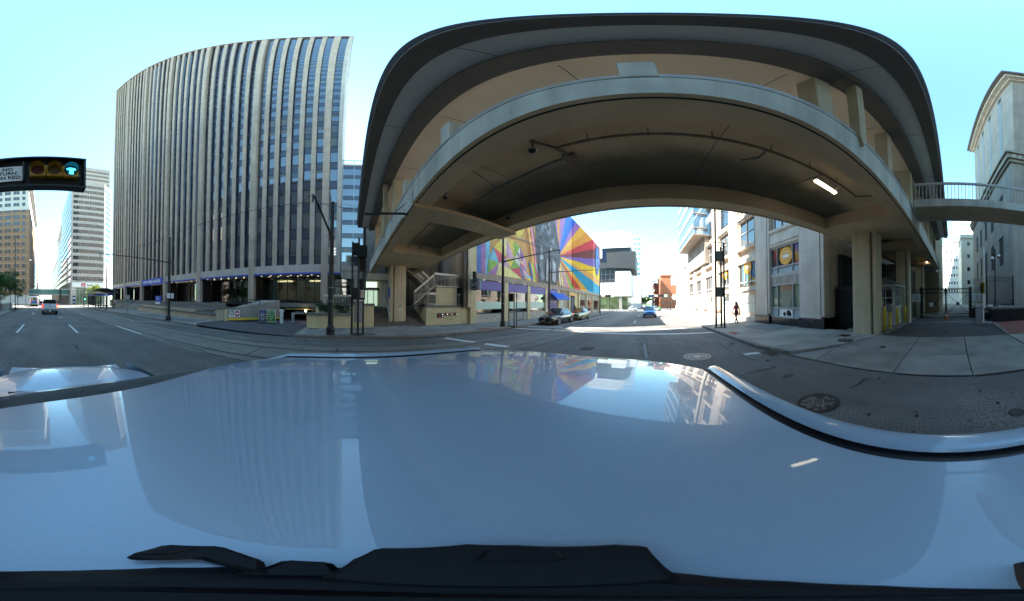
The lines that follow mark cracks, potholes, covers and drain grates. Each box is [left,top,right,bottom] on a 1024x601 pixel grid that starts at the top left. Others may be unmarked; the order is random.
manhole cover [796,393,841,413]
manhole cover [1008,408,1024,416]
